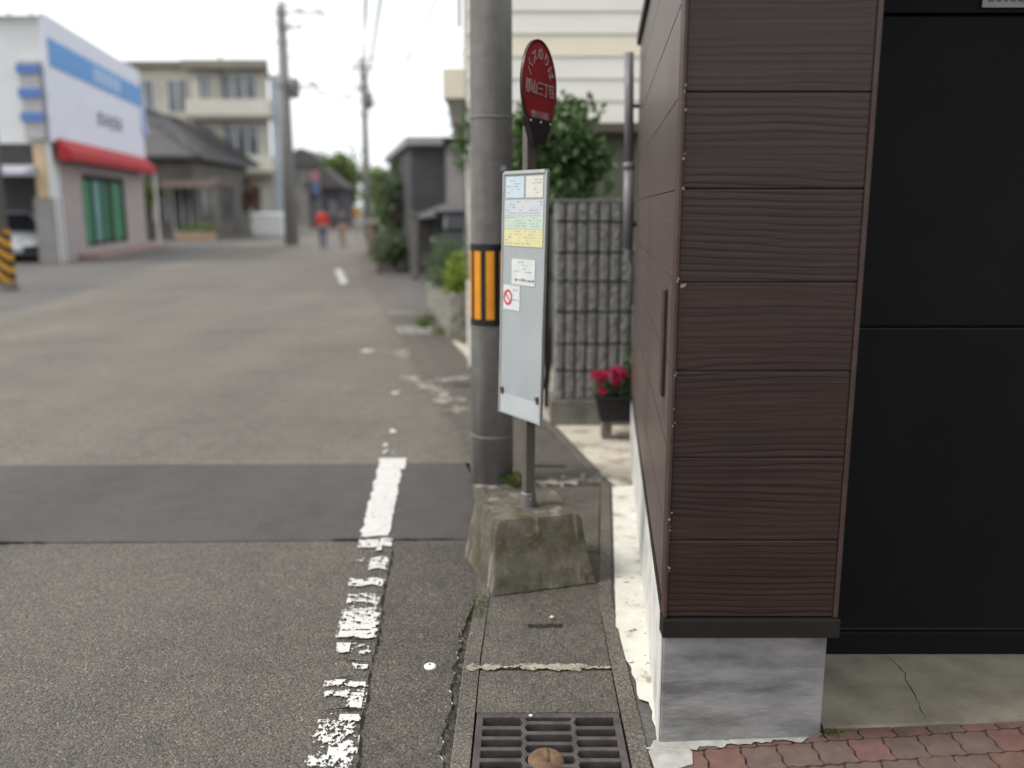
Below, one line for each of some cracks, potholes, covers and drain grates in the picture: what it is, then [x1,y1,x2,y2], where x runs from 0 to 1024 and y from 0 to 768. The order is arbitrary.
drain grate [472,713,630,768]
